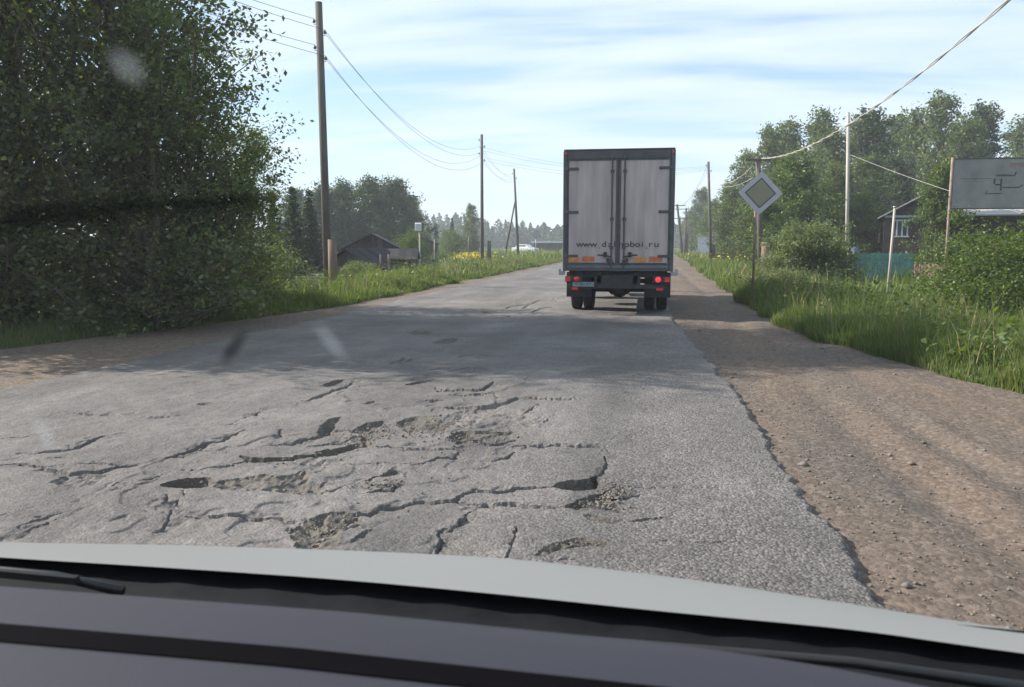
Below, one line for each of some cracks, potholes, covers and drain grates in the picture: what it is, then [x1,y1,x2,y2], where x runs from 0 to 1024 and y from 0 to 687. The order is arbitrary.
pothole [287,513,363,550]
pothole [449,430,515,445]
crack [1,412,719,558]
pothole [563,491,614,510]
pothole [551,475,601,491]
pothole [316,416,343,438]
crack [307,382,354,402]
pothole [160,477,214,489]
crack [390,341,578,423]
